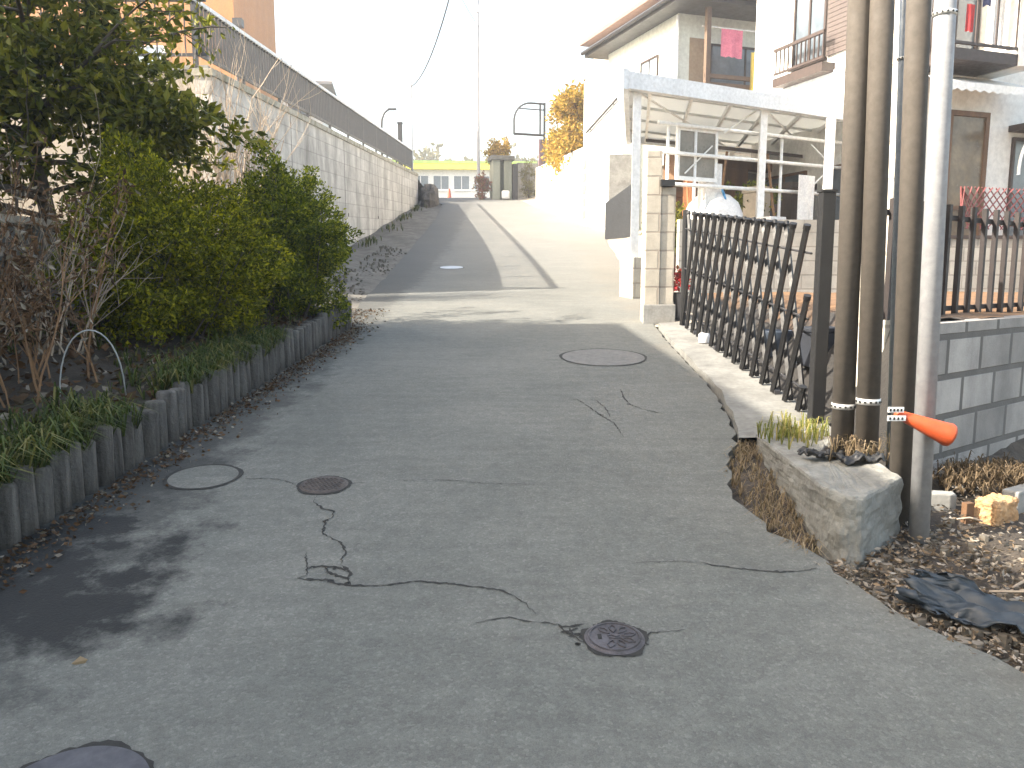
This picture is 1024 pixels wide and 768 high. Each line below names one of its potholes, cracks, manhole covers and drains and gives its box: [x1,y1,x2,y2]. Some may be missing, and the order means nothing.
manhole cover [579,620,649,657]
crack [299,496,584,645]
crack [577,391,663,435]
crack [636,561,816,572]
manhole cover [163,464,244,490]
manhole cover [296,475,353,495]
manhole cover [559,348,647,366]
